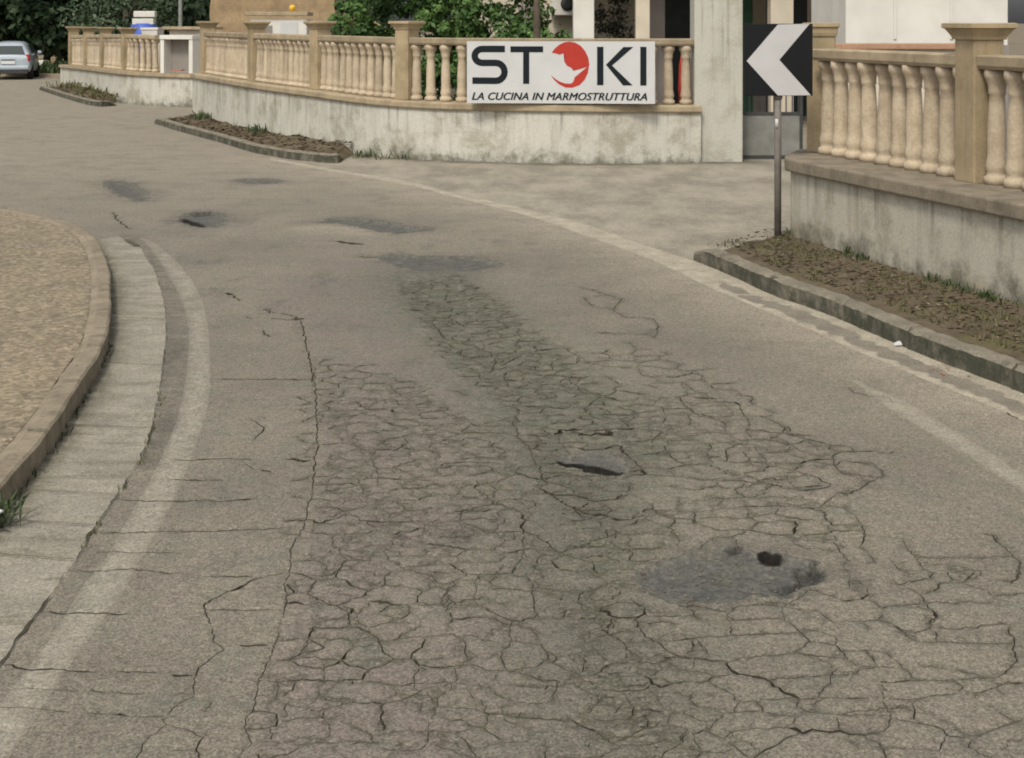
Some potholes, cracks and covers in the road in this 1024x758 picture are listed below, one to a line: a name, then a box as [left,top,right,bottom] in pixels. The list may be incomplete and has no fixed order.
pothole [553,451,633,476]
crack [1,276,1024,758]
